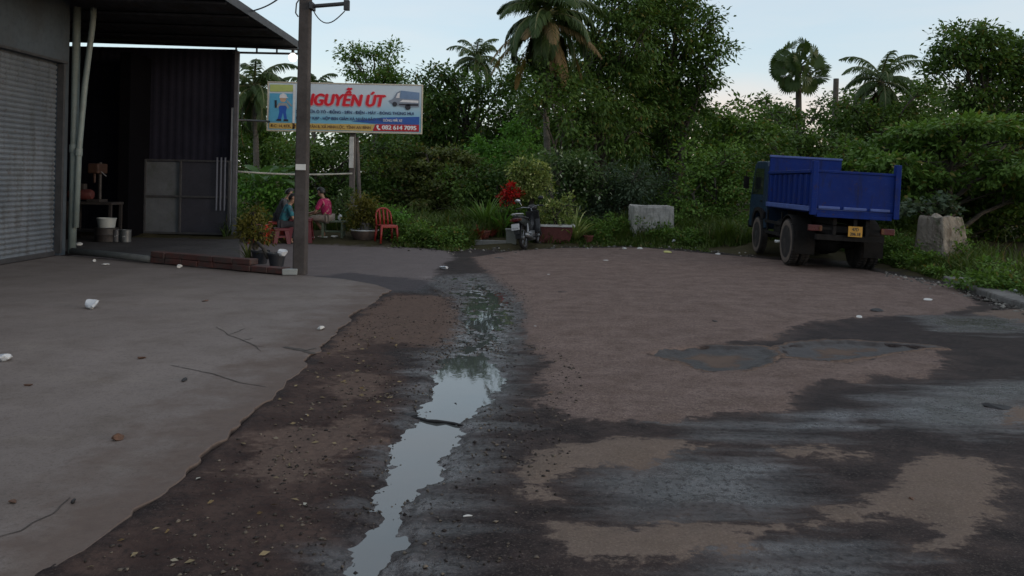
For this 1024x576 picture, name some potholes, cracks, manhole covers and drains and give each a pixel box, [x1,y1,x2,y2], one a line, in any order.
pothole [770,338,951,363]
pothole [654,344,783,372]
crack [284,346,316,354]
crack [1,497,70,536]
